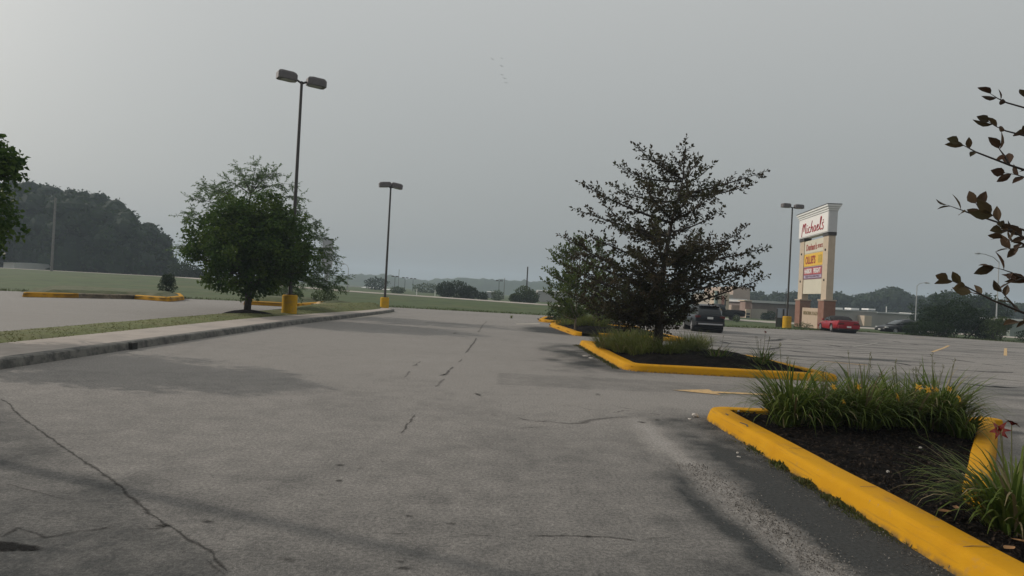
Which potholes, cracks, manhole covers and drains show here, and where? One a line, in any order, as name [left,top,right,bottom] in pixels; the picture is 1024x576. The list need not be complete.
pothole [0,541,39,551]
